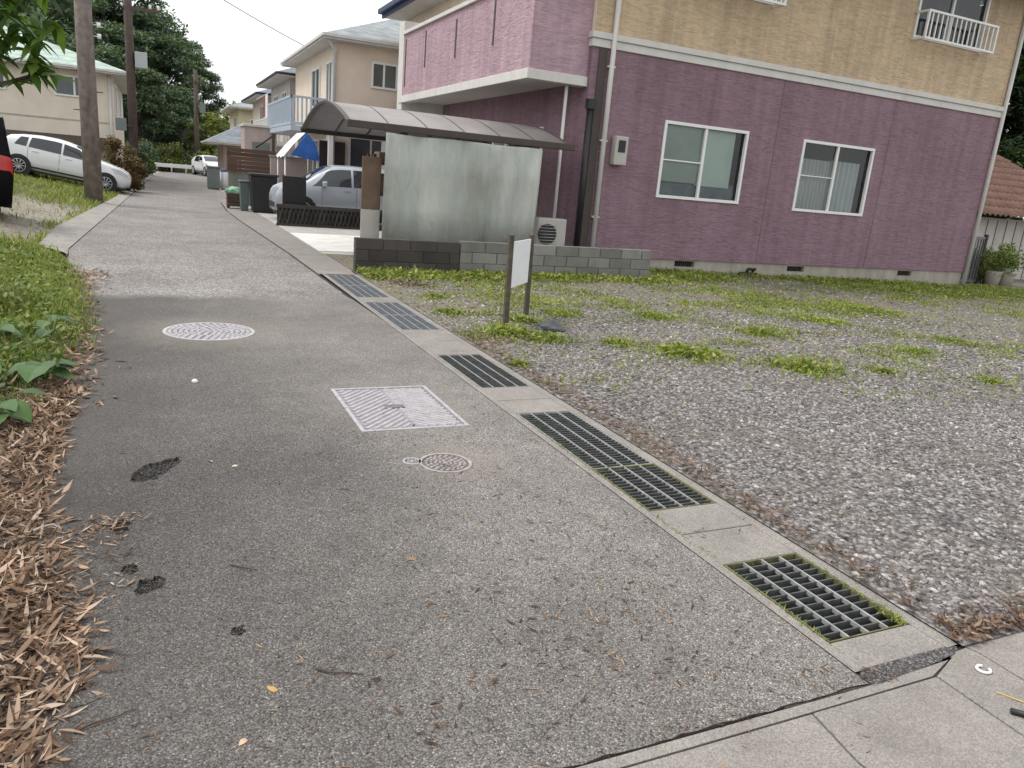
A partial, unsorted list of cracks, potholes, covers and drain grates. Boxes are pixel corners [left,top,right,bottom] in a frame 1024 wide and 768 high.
drain grate [327,275,371,286]
drain grate [593,464,716,511]
drain grate [516,411,653,470]
drain grate [436,354,530,388]
drain grate [341,285,390,298]
manhole cover [419,453,472,473]
manhole cover [331,385,470,432]
drain grate [382,315,441,330]
drain grate [724,553,908,644]
